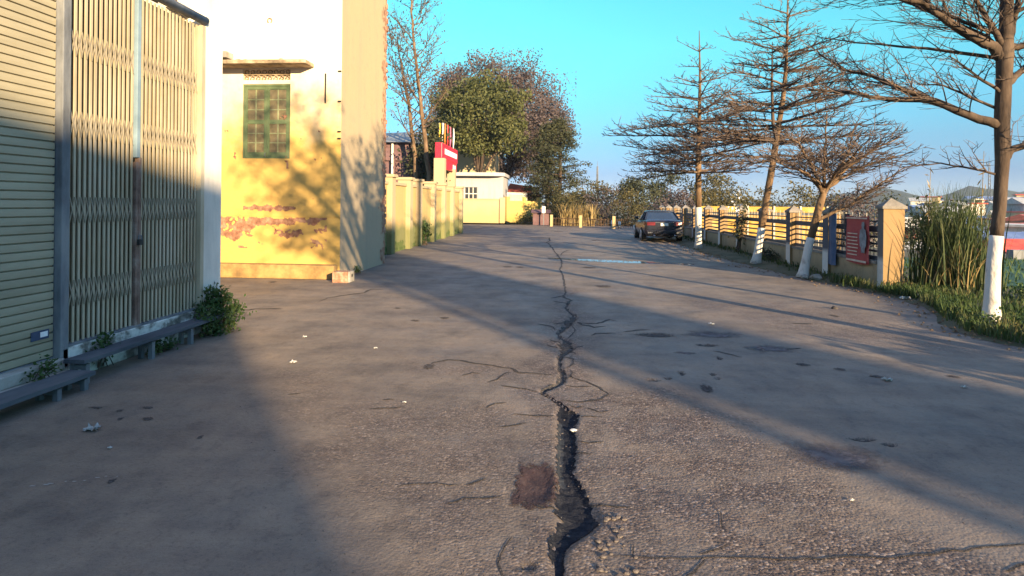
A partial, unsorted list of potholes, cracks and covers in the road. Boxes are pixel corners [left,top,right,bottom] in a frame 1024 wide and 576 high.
crack [428,231,1024,576]
